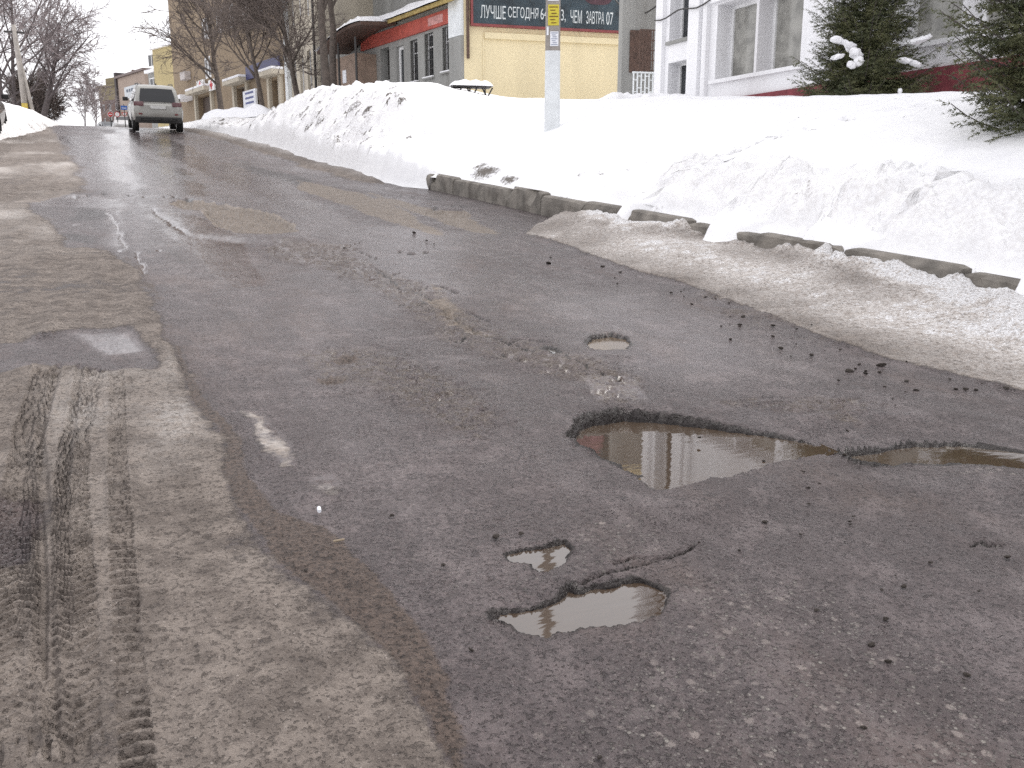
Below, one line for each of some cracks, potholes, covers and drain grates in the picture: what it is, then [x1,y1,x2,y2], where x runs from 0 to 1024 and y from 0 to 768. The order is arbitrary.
pothole [560,404,838,493]
crack [68,192,197,276]
pothole [828,439,1024,471]
pothole [470,571,680,643]
pothole [580,331,640,352]
crack [564,541,699,585]
pothole [494,534,582,576]
